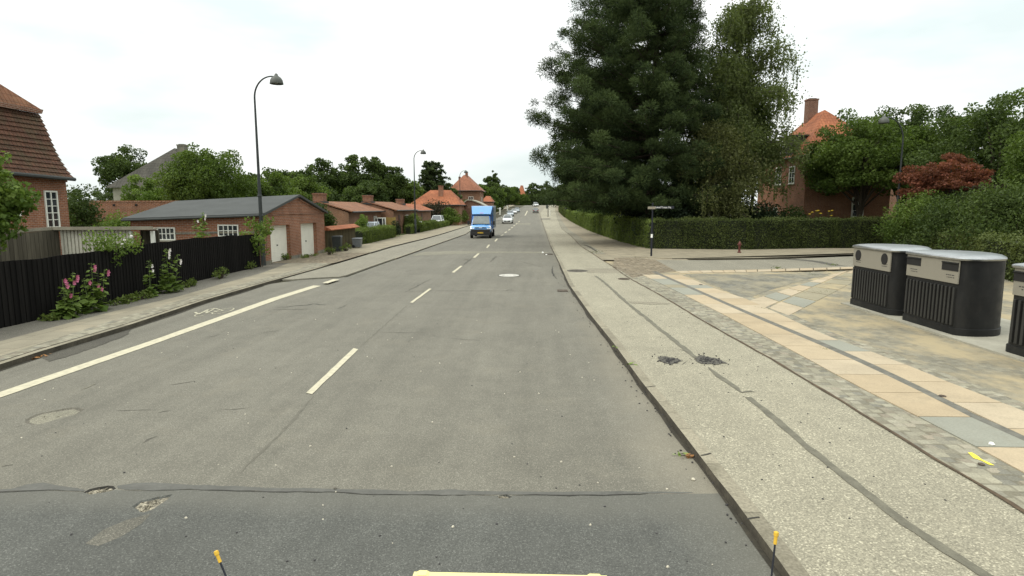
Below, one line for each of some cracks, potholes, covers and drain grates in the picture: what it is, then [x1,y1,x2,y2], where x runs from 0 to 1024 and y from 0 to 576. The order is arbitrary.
pothole [84,486,116,494]
pothole [132,494,172,512]
